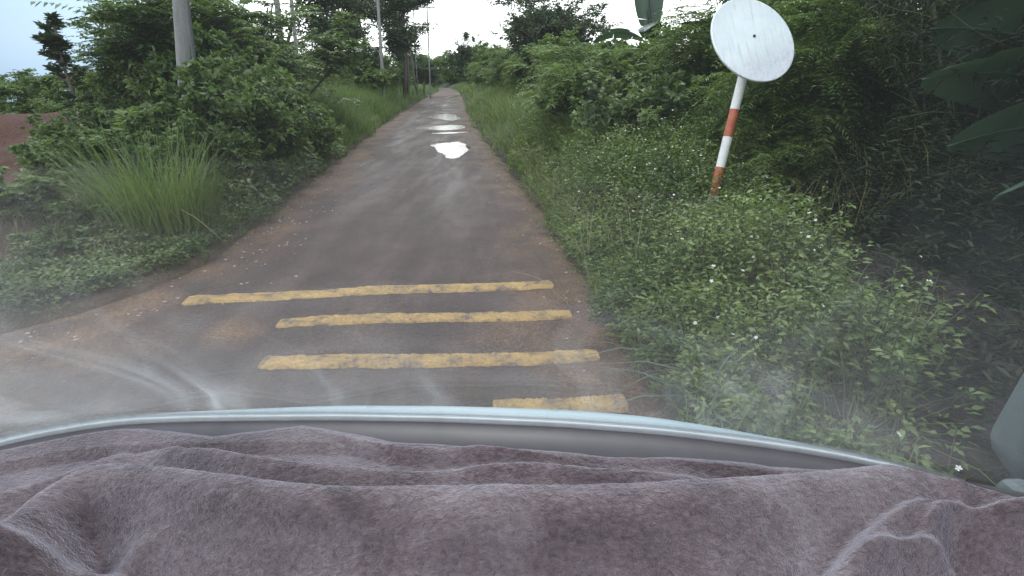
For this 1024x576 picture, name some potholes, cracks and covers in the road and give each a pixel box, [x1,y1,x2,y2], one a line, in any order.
pothole [428,140,471,158]
